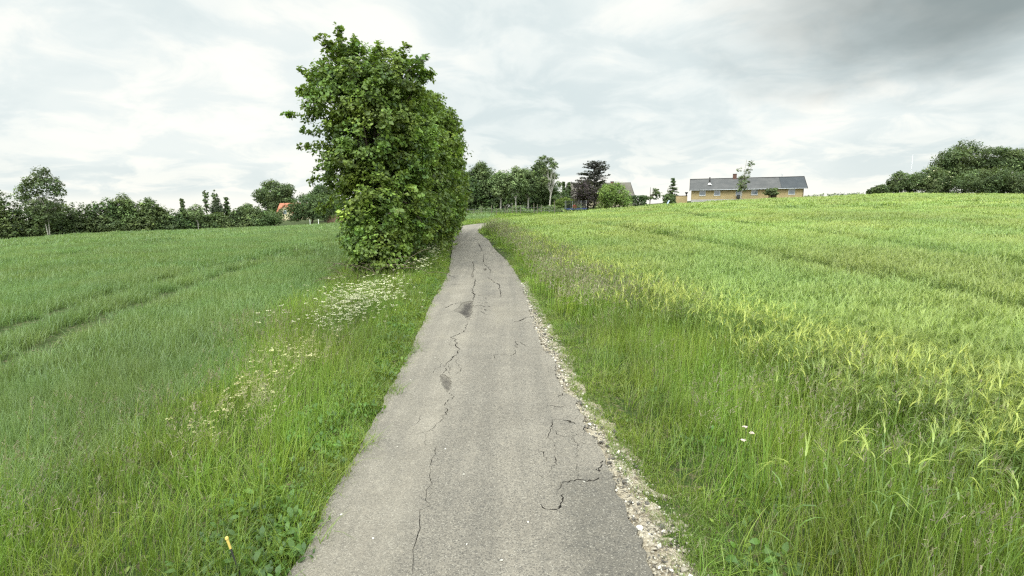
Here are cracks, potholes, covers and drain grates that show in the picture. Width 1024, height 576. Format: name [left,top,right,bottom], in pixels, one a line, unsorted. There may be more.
pothole [440,374,452,392]
crack [541,393,603,510]
crack [412,394,453,572]
crack [433,239,502,373]
pothole [454,301,474,320]
